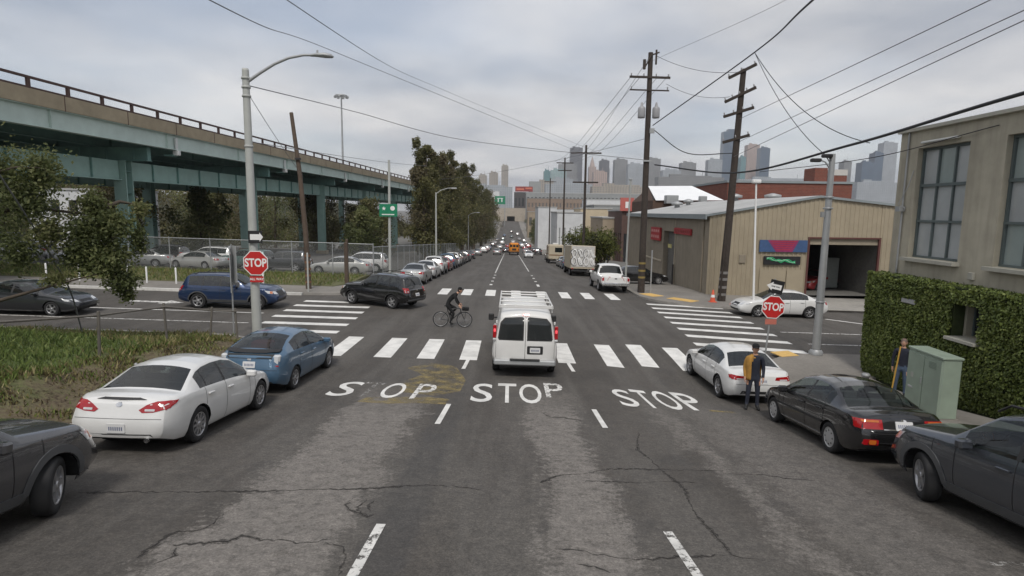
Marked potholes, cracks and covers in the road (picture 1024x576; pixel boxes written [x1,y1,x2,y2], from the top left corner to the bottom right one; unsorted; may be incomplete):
crack [138,517,345,573]
crack [540,433,759,573]
crack [78,485,468,517]
